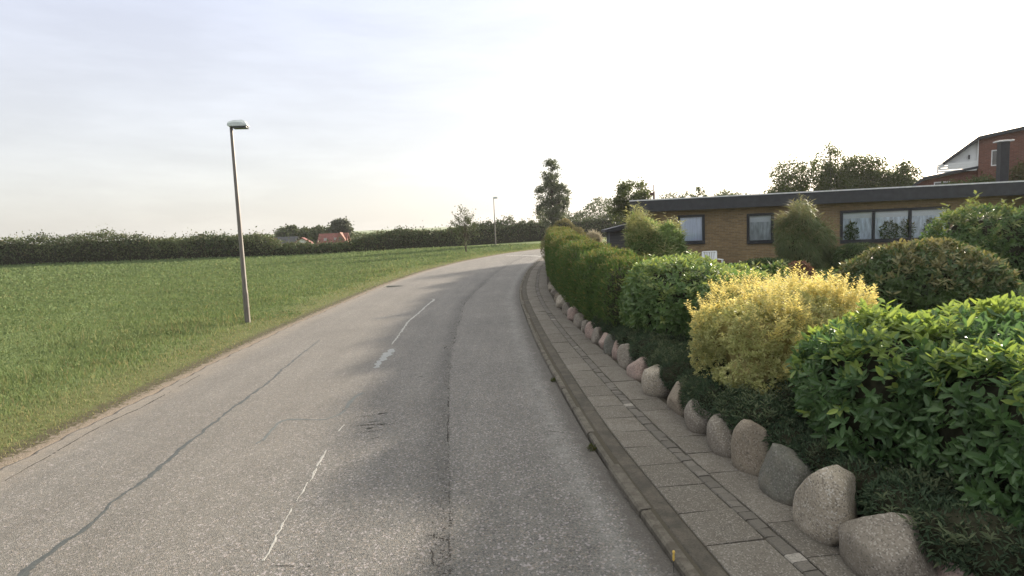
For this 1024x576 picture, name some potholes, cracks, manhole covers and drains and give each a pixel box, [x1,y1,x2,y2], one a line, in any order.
crack [5,375,200,481]
